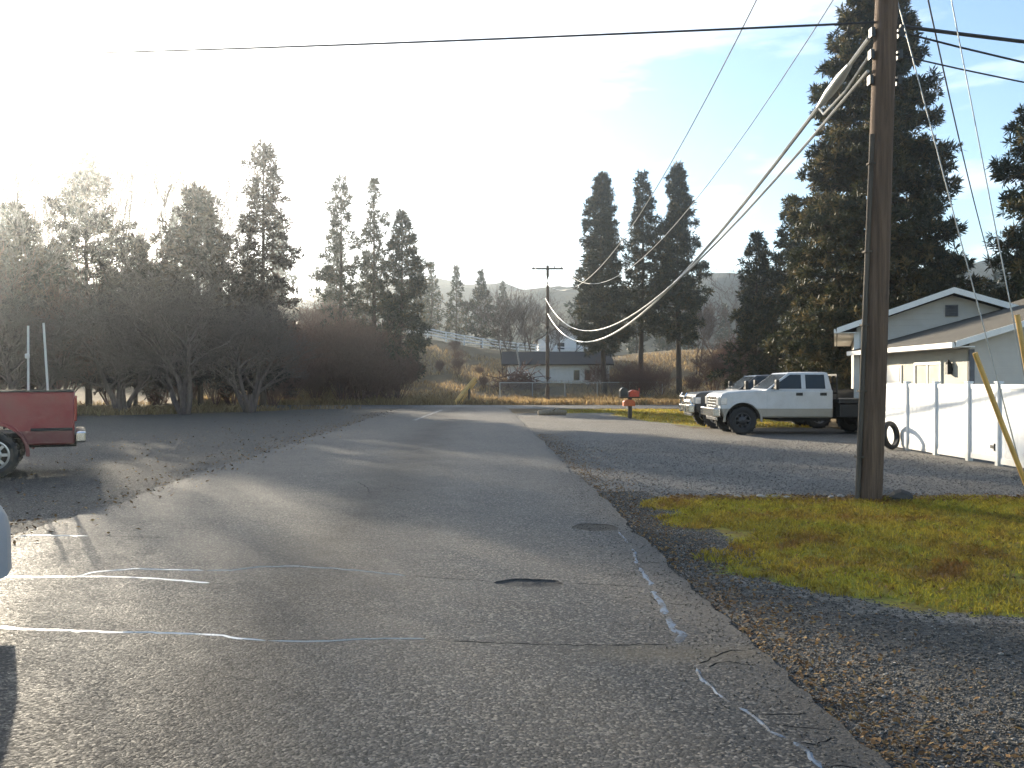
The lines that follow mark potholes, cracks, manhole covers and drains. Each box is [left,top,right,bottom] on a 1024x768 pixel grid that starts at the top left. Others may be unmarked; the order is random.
crack [7,566,636,587]
crack [0,626,662,646]
crack [696,650,857,768]
pothole [494,578,564,587]
